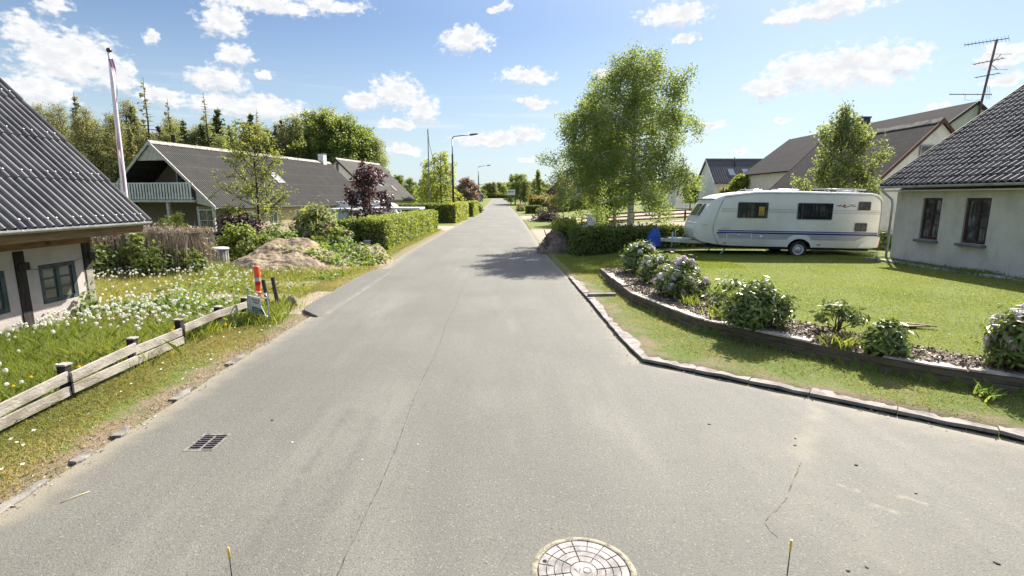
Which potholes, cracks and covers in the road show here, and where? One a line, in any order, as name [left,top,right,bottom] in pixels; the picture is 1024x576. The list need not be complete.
manhole cover [531,537,638,576]
drain grate [183,433,232,451]
crack [765,463,801,538]
